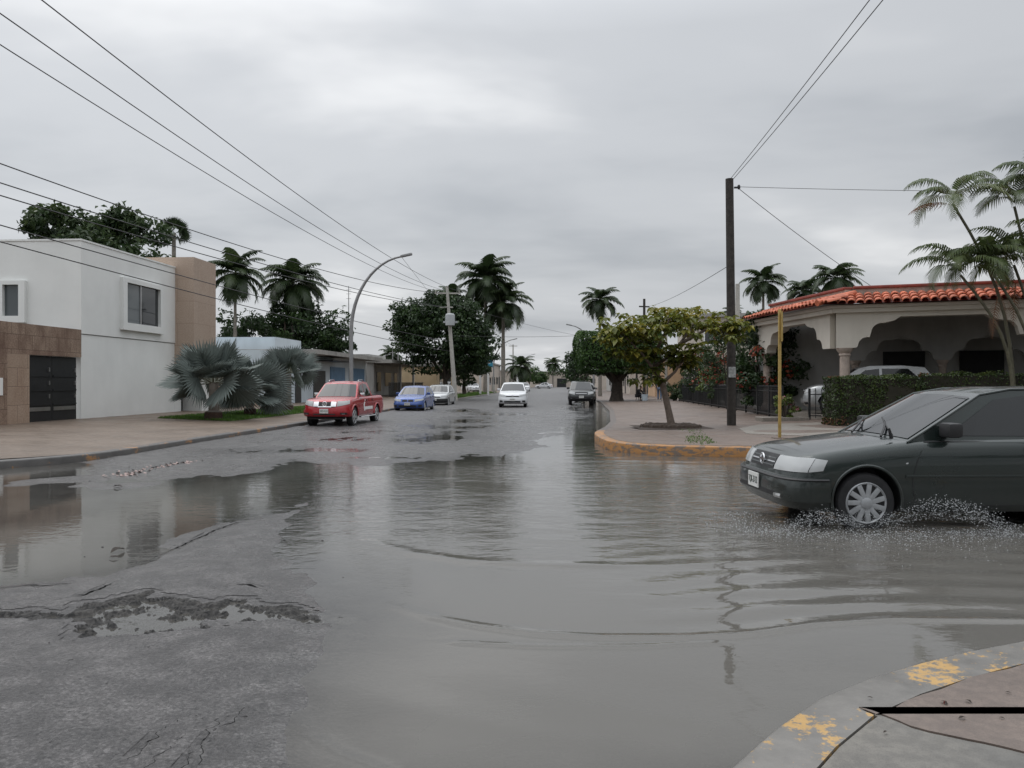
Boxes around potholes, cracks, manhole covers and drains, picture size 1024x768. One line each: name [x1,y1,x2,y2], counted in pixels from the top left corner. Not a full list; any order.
crack [0,520,275,601]
pothole [0,588,338,641]
crack [122,707,247,768]
